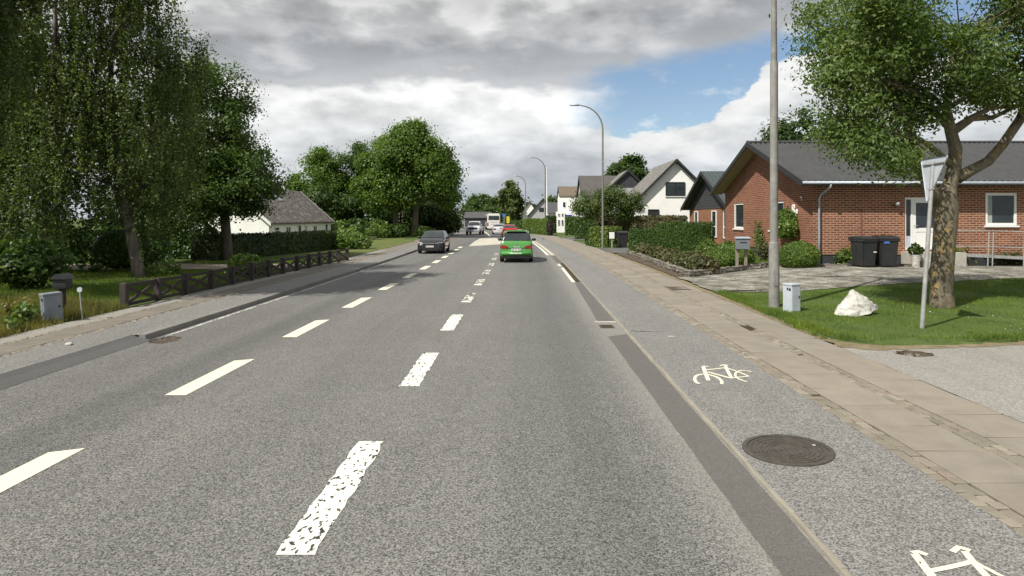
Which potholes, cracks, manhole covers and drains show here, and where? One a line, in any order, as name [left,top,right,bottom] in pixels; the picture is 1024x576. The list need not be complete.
manhole cover [742,434,835,467]
